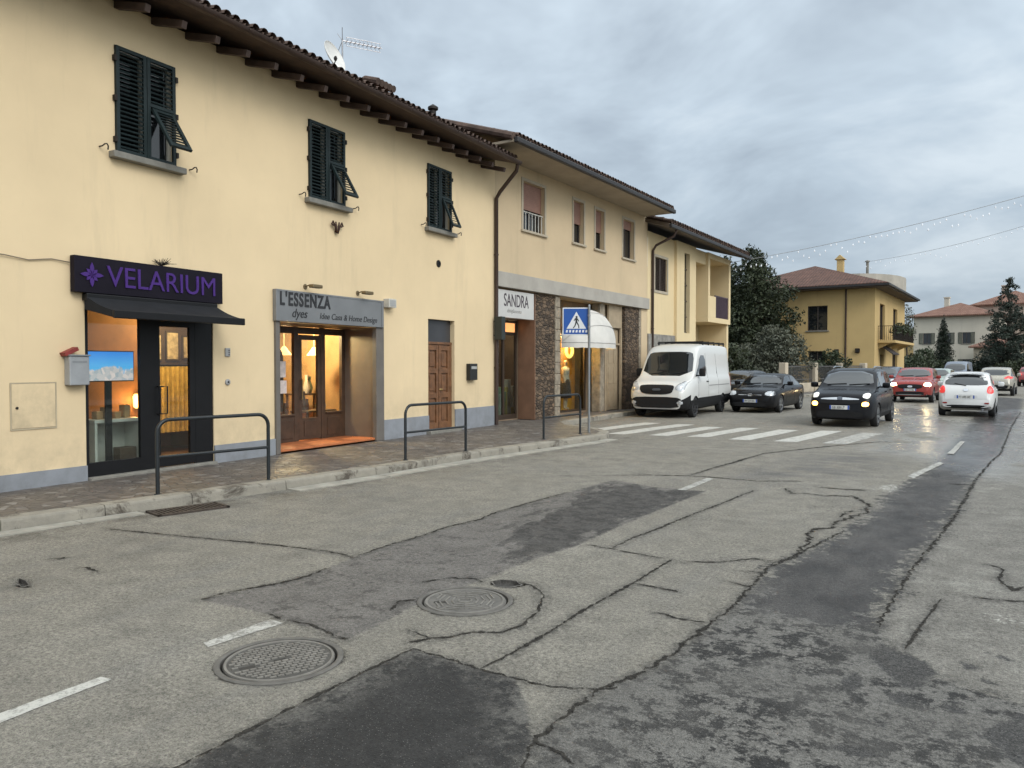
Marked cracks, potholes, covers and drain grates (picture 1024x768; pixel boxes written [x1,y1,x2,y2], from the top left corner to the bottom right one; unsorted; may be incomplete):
crack [115,529,350,557]
manhole cover [213,637,344,686]
crack [876,412,1021,648]
drain grate [145,502,230,517]
crack [593,487,870,587]
crack [390,577,544,642]
manhole cover [417,586,513,616]
crack [533,740,575,764]
